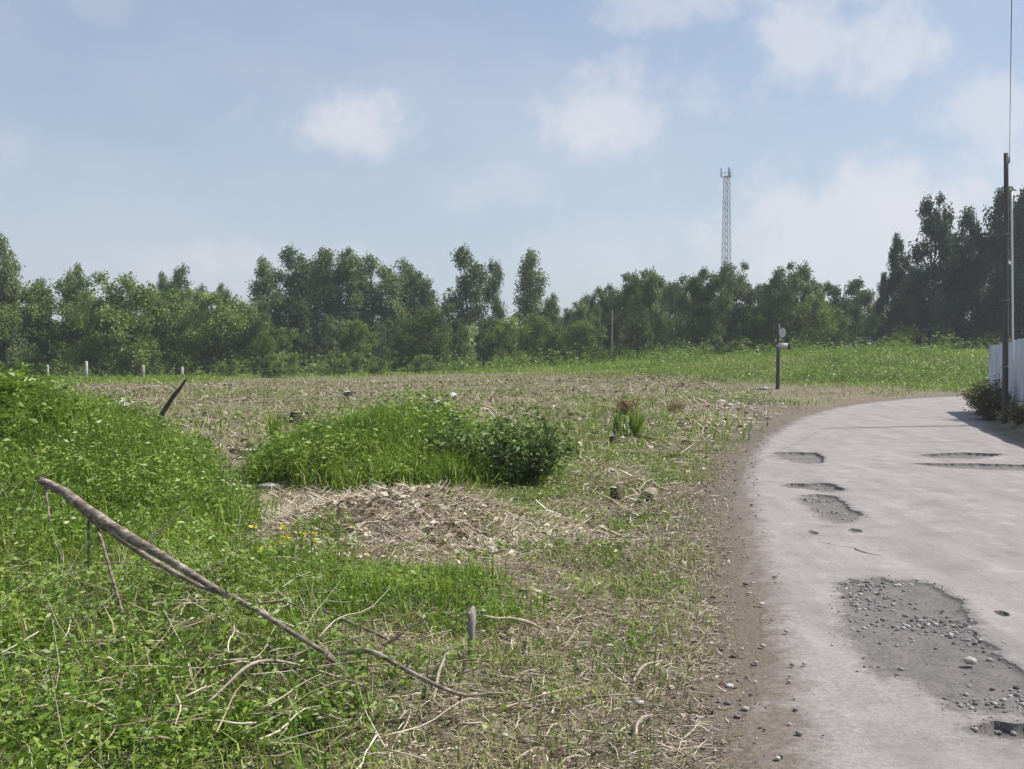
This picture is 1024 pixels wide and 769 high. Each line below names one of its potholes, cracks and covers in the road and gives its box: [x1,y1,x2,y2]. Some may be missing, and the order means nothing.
pothole [954,717,1024,739]
pothole [829,575,1024,718]
pothole [783,483,845,492]
pothole [776,452,825,464]
pothole [800,494,870,523]
